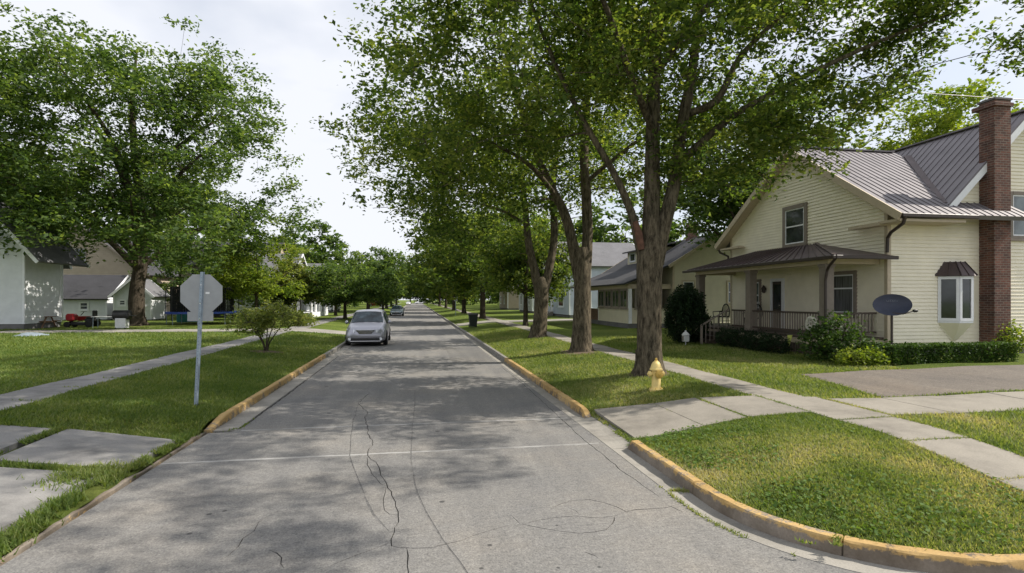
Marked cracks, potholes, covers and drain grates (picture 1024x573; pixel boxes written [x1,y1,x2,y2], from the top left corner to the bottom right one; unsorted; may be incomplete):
crack [321,394,505,573]
crack [514,499,682,533]
